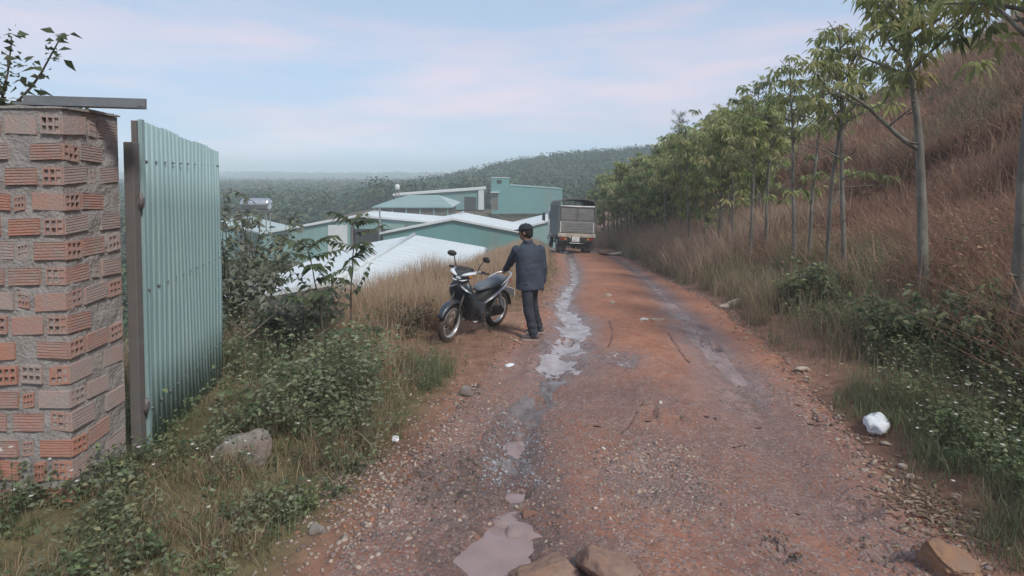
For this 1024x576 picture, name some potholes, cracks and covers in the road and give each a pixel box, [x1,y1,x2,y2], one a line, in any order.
pothole [494,486,538,509]
pothole [415,512,567,576]
pothole [480,414,544,497]
